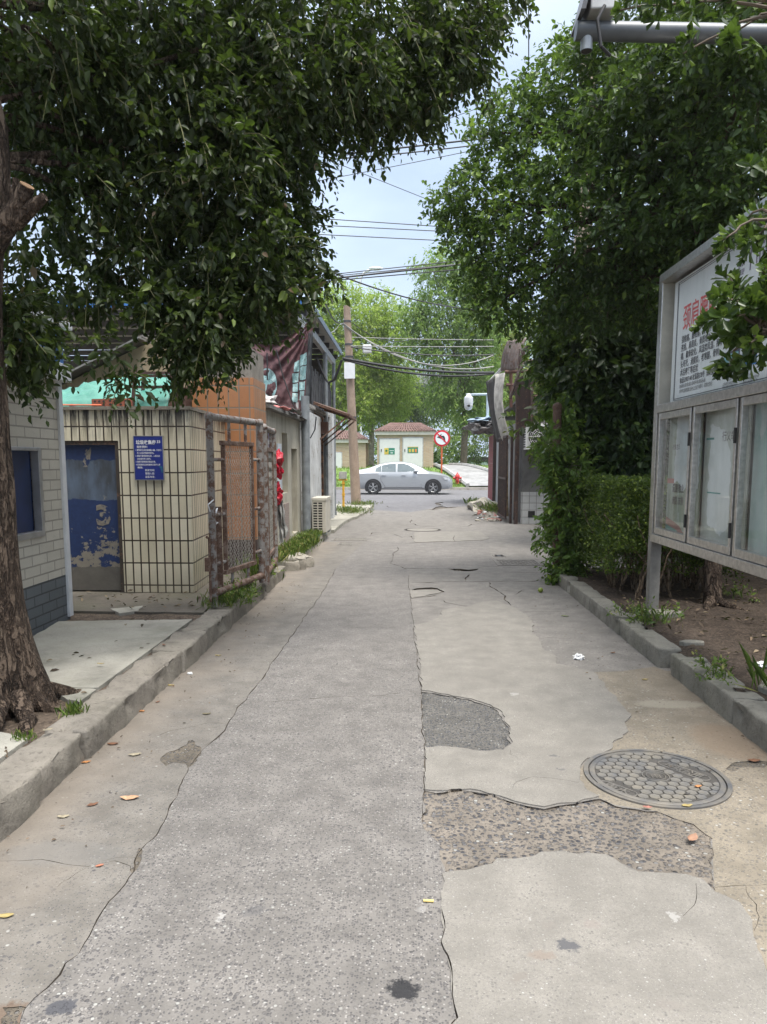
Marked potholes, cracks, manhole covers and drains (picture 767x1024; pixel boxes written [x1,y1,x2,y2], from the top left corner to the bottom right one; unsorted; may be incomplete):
crack [390,520,538,606]
manhole cover [584,749,733,810]
crack [722,884,766,930]
pothole [421,789,715,890]
crack [23,857,136,880]
